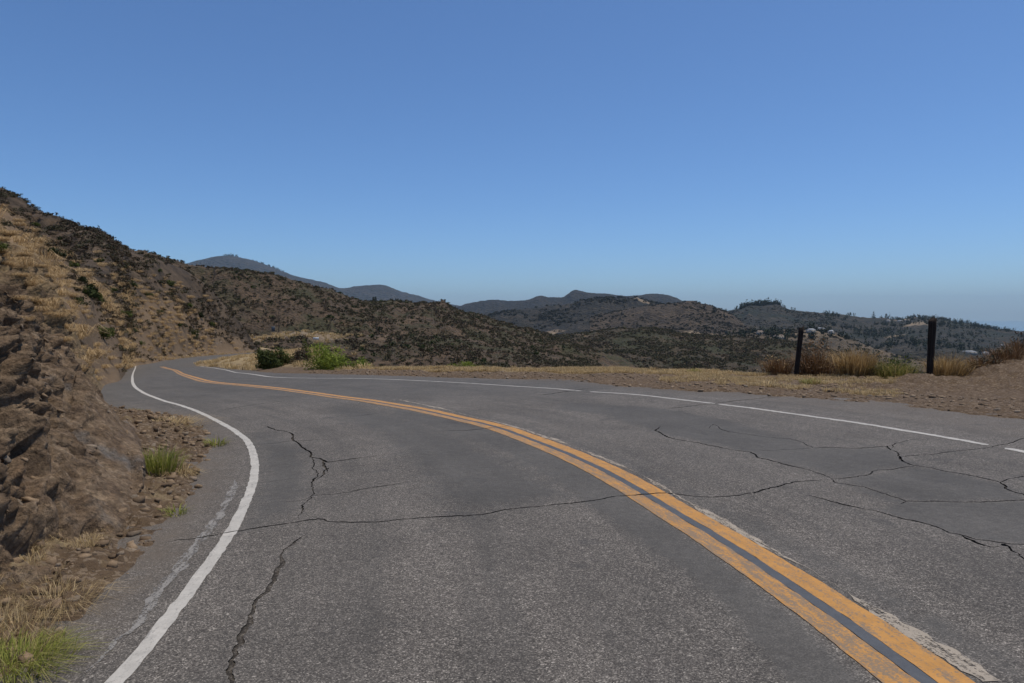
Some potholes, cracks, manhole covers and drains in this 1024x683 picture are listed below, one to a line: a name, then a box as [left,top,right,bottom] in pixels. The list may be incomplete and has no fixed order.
crack [655,424,1024,559]
crack [163,426,827,683]
